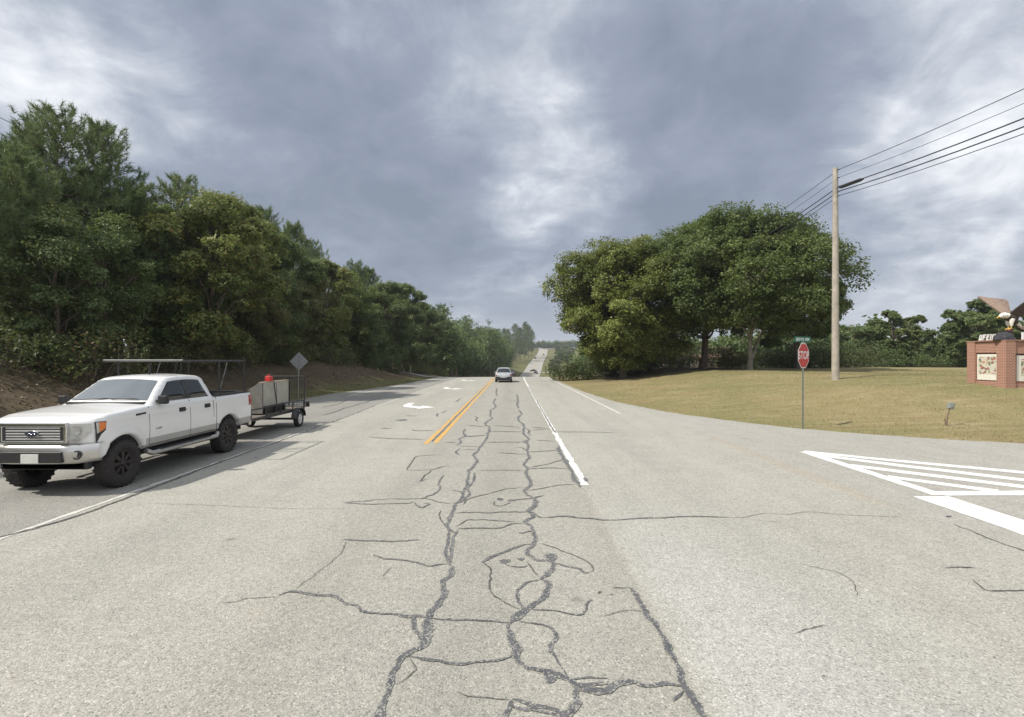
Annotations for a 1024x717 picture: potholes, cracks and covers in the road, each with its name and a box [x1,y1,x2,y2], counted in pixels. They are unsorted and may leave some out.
crack [395,655,514,685]
crack [460,692,569,717]
crack [296,386,719,589]
crack [945,566,1024,591]
crack [433,543,594,623]
